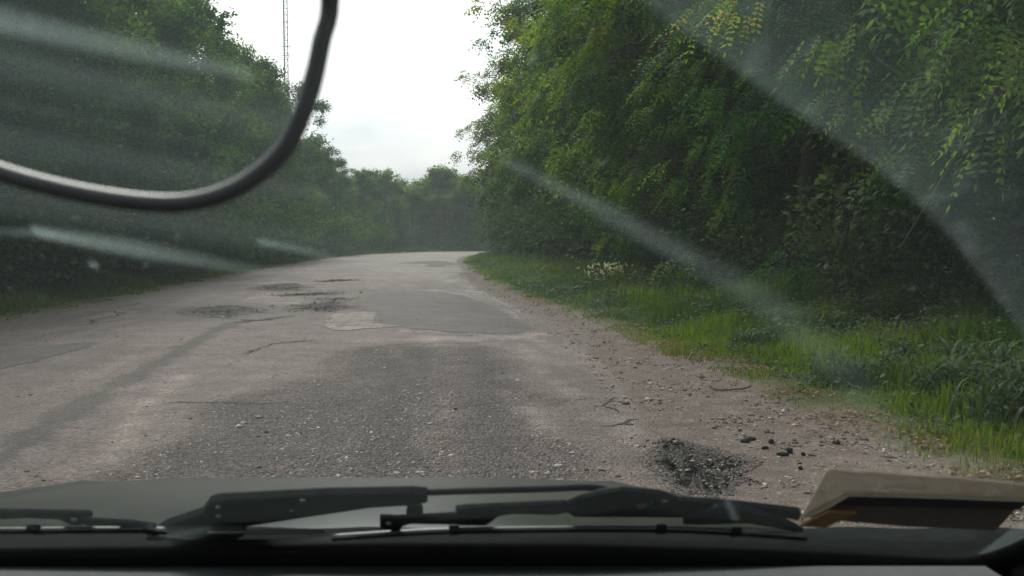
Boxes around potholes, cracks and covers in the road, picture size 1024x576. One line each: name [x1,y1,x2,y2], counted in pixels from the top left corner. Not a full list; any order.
pothole [636,437,764,499]
pothole [282,301,363,312]
crack [73,301,139,326]
pothole [246,283,314,292]
pothole [175,305,271,319]
